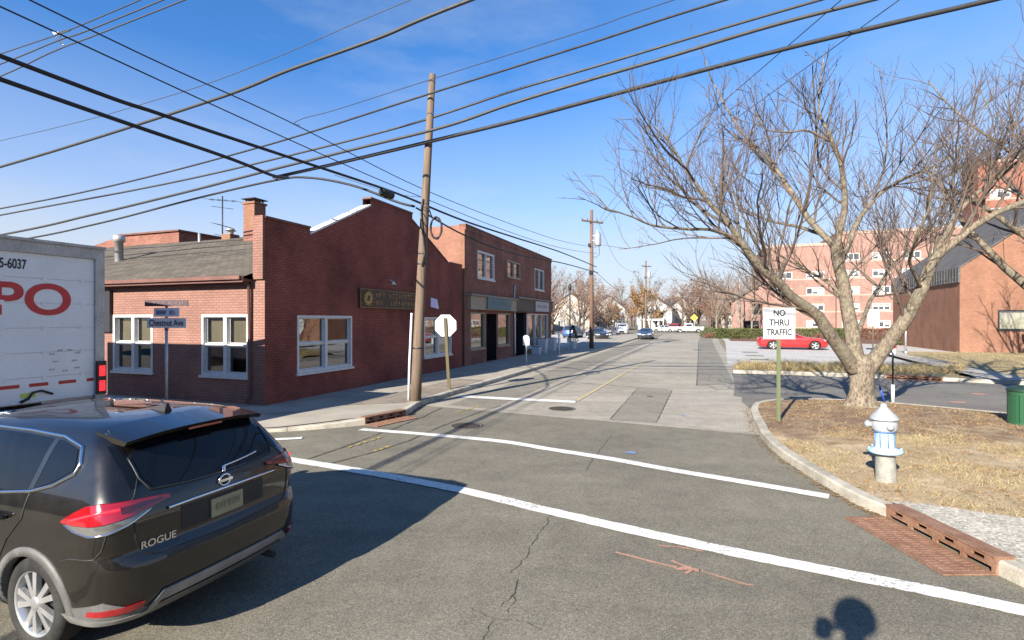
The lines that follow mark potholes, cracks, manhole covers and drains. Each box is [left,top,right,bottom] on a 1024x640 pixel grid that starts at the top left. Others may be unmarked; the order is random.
crack [468,518,548,640]
drain grate [844,504,1016,576]
drain grate [360,409,418,427]
